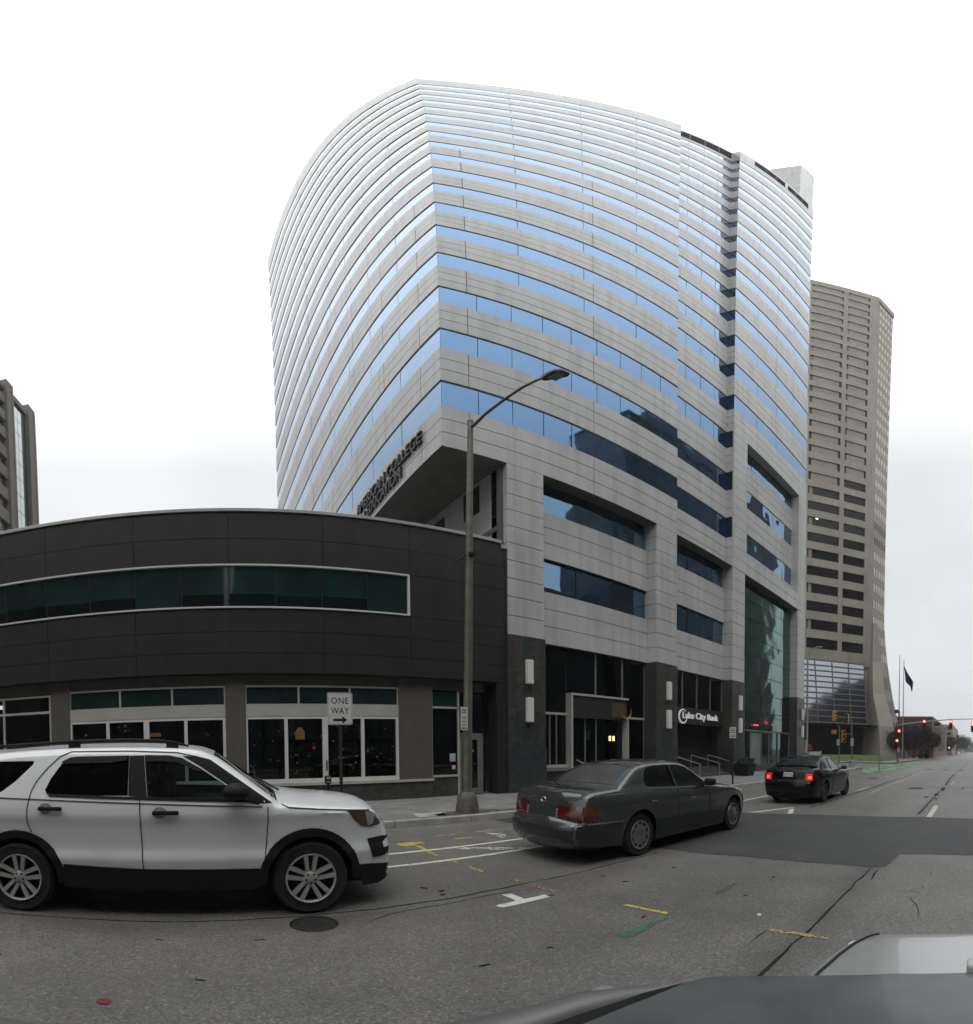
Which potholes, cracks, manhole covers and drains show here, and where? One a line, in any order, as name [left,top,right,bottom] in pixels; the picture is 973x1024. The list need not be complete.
crack [747,868,878,976]
manhole cover [289,916,339,932]
